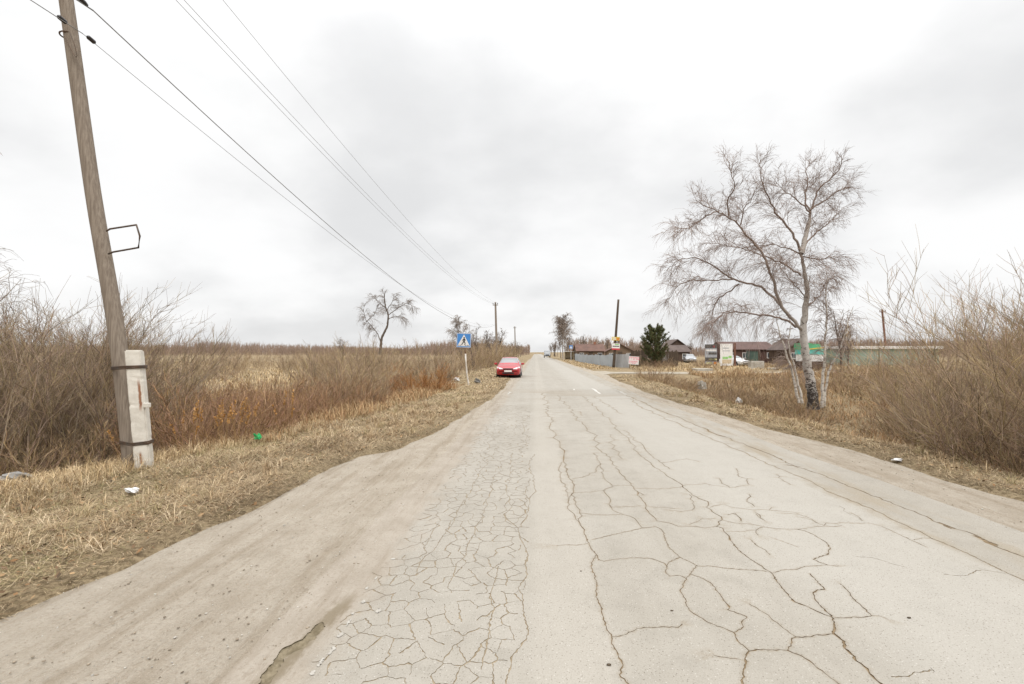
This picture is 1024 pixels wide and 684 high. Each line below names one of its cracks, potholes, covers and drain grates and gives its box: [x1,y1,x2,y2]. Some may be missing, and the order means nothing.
crack [317,405,536,684]
crack [541,393,935,684]
pothole [259,622,325,684]
